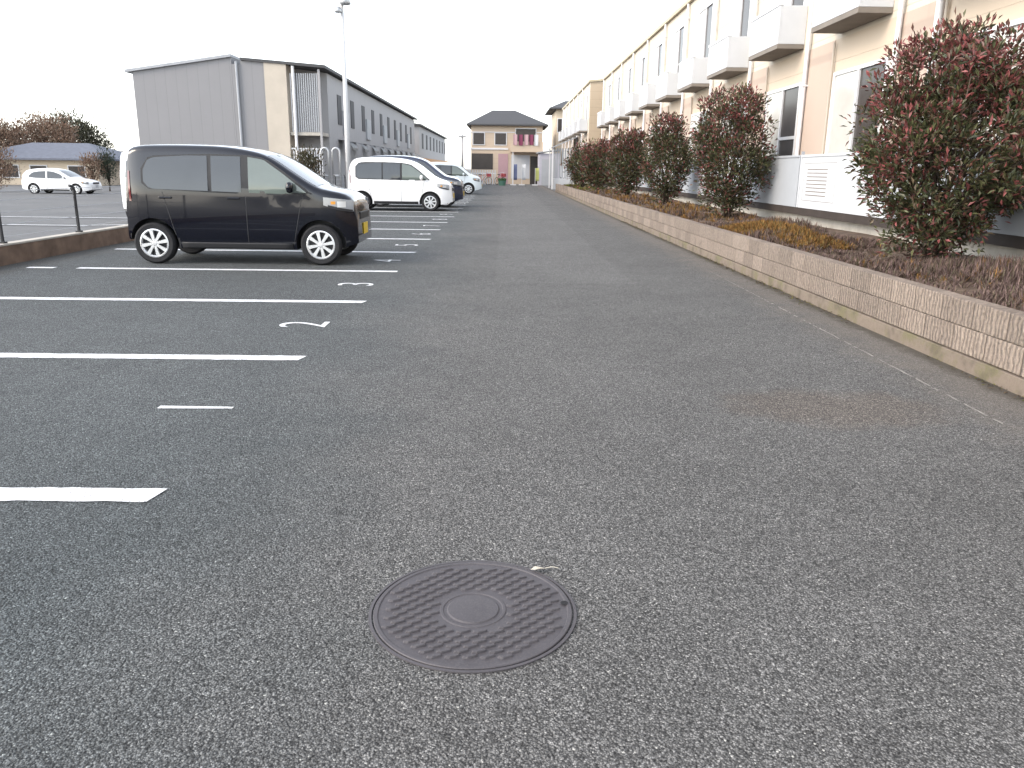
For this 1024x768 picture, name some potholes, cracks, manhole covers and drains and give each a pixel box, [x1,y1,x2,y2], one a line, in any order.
manhole cover [368,560,577,674]
